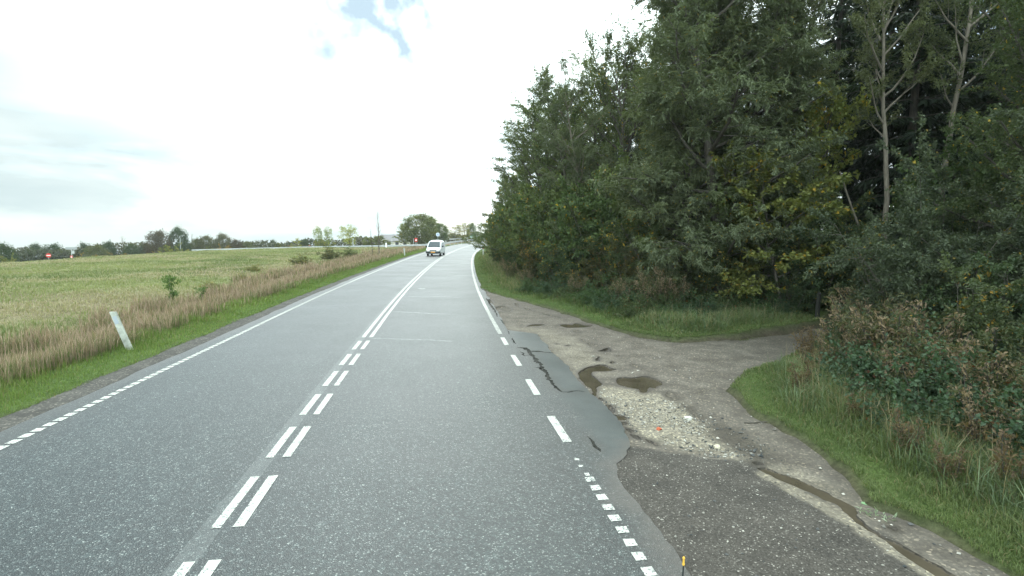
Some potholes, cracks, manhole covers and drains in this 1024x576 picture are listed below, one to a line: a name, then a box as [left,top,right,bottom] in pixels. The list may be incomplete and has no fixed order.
pothole [578,364,616,396]
crack [486,298,574,392]
pothole [616,376,663,393]
